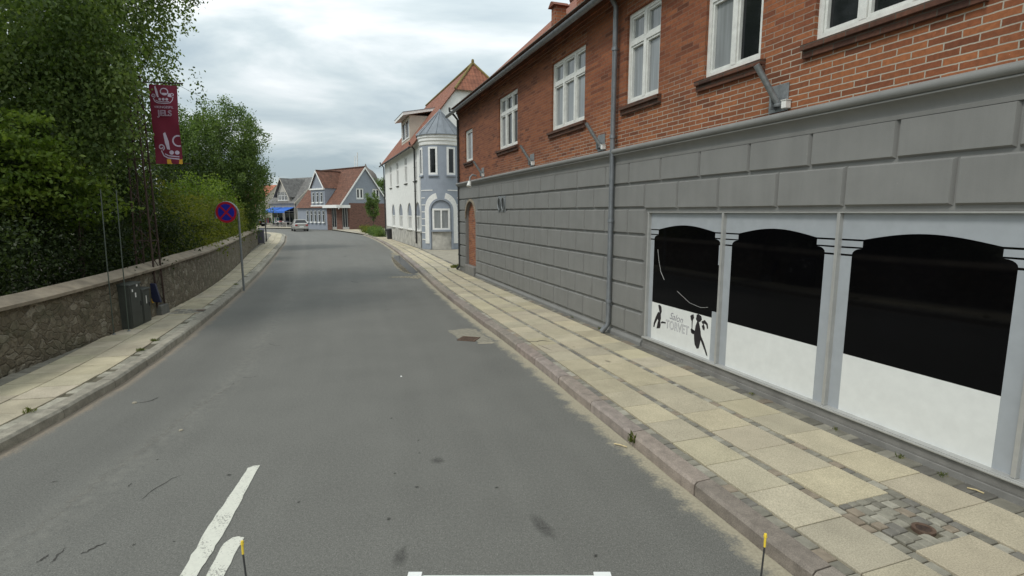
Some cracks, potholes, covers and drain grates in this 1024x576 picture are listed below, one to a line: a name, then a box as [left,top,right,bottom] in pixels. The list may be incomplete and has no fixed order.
manhole cover [911,522,937,537]
